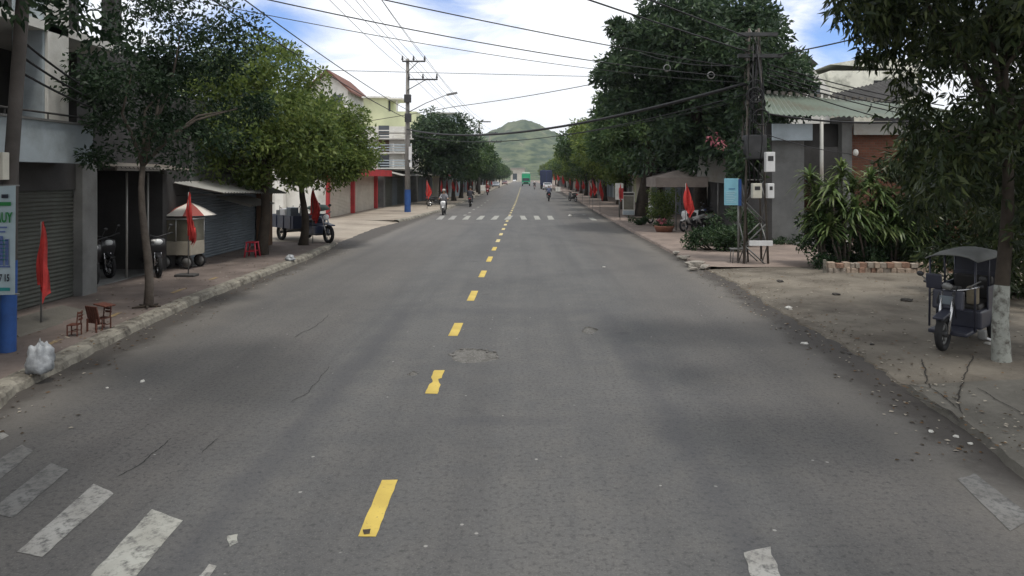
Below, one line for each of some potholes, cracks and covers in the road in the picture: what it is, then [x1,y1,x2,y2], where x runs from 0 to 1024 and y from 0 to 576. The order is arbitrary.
pothole [448,348,499,363]
crack [898,355,974,422]
crack [117,438,171,477]
